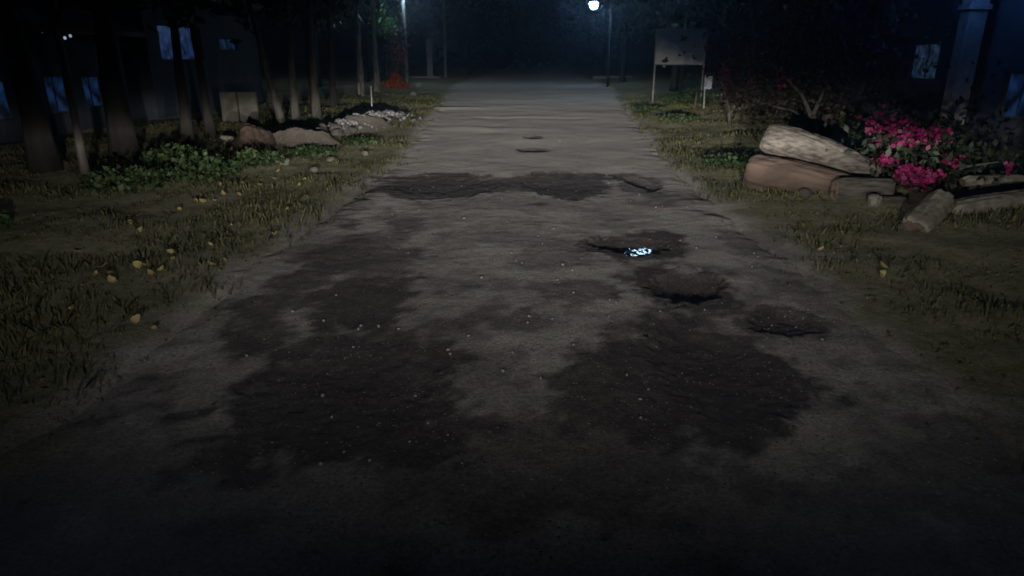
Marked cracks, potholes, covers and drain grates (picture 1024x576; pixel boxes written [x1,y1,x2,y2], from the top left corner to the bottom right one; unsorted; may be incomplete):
pothole [732,304,843,343]
pothole [577,234,682,260]
pothole [630,266,738,309]
